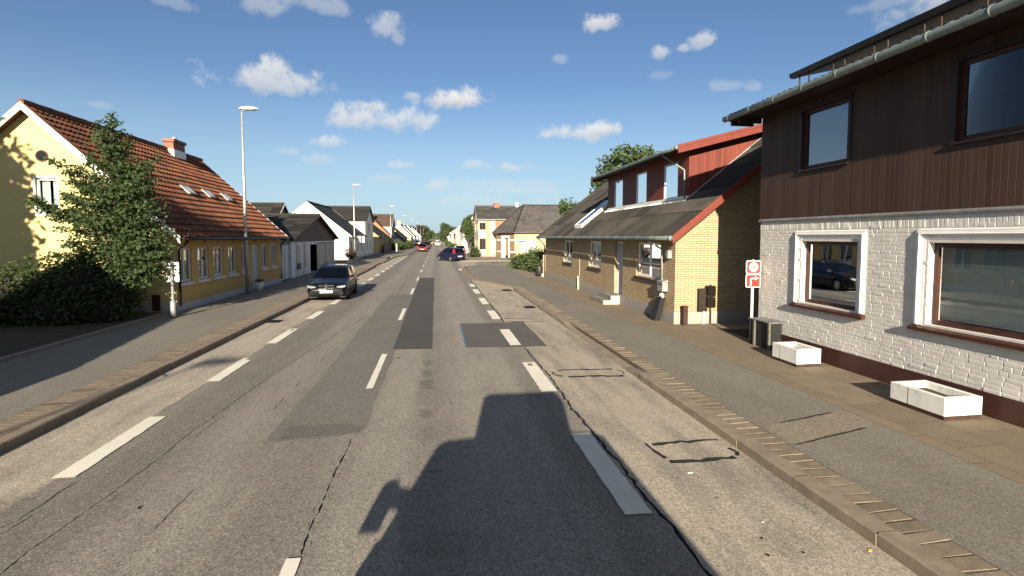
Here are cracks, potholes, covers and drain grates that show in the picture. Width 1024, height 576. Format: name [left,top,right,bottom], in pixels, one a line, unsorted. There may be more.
crack [525,348,739,576]
